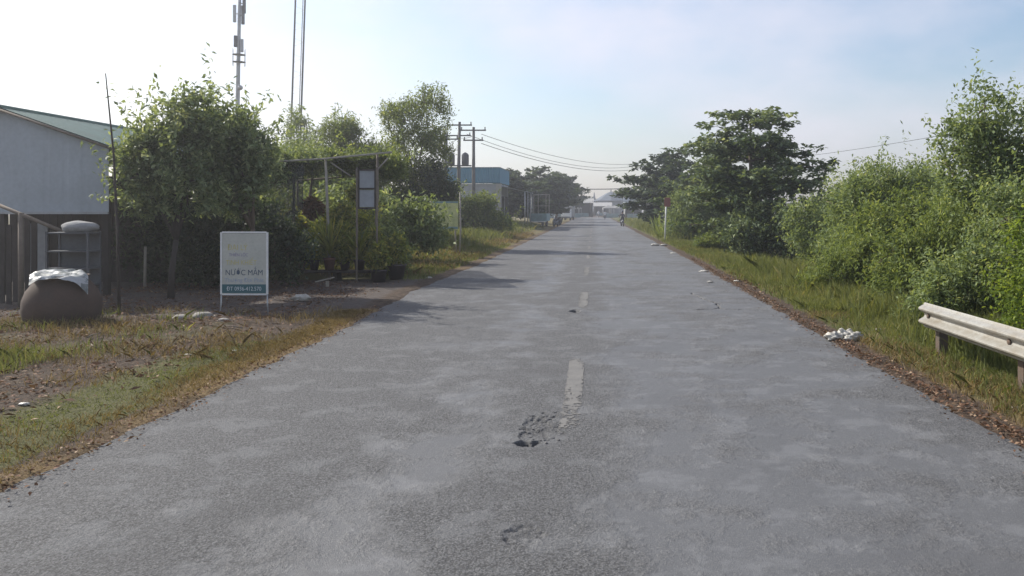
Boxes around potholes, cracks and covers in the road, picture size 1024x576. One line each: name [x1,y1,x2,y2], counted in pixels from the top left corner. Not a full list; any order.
pothole [513,412,565,447]
pothole [498,522,548,548]
